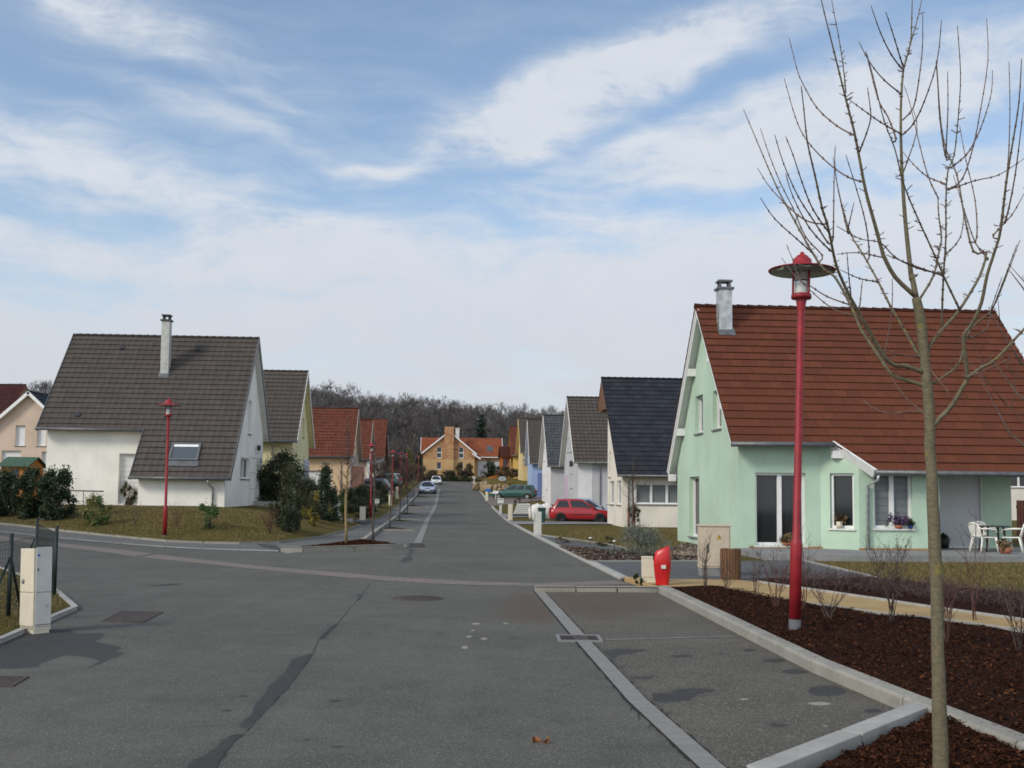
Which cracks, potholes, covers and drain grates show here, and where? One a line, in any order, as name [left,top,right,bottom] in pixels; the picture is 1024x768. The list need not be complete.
manhole cover [0,676,29,687]
manhole cover [101,610,163,623]
drain grate [556,634,603,642]
